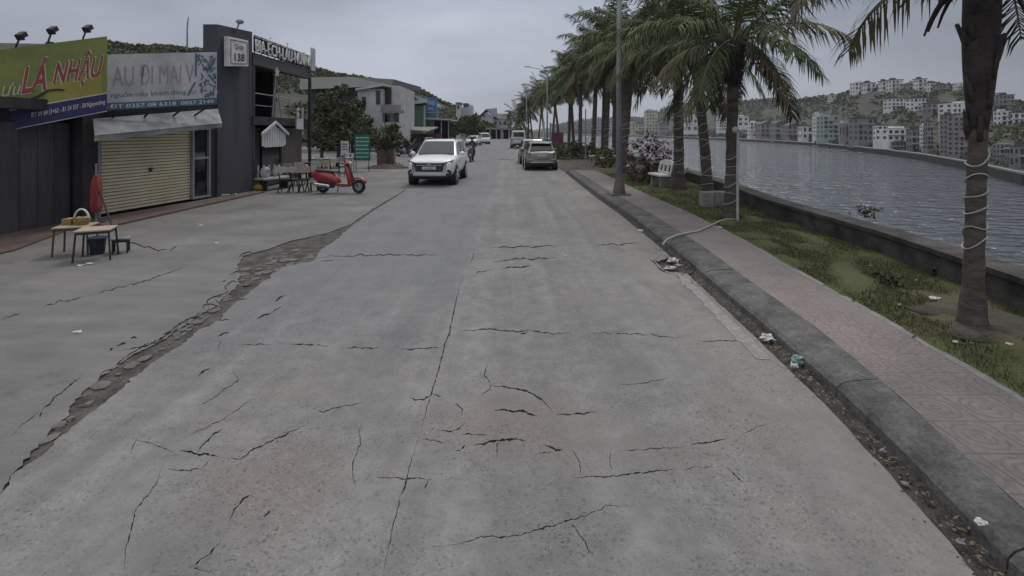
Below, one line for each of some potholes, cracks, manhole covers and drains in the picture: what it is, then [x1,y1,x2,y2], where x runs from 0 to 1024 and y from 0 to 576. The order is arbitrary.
crack [476,242,634,273]
crack [483,366,593,416]
crack [3,191,437,573]
crack [463,328,736,342]
crack [422,403,763,482]
crack [441,505,627,551]
